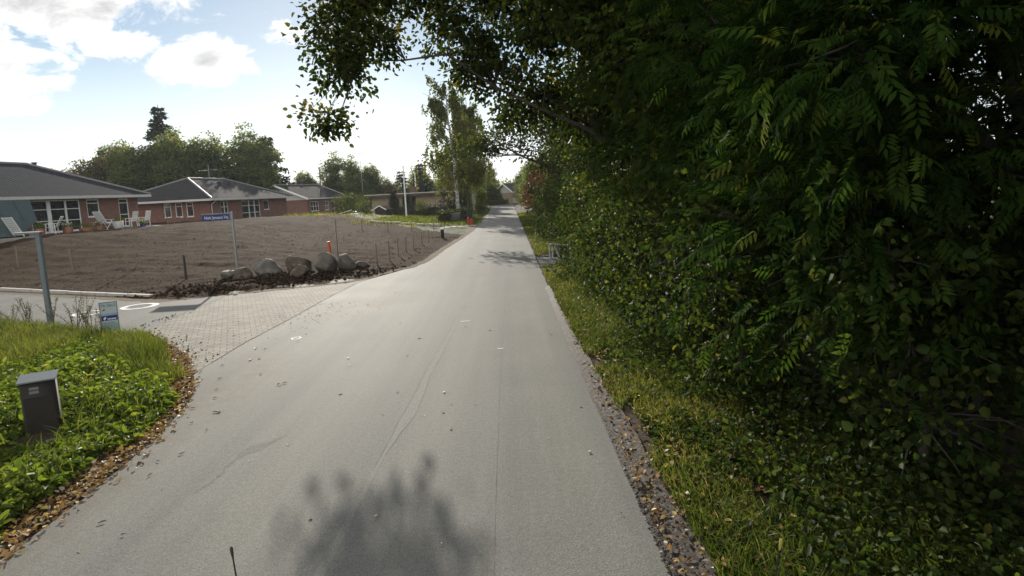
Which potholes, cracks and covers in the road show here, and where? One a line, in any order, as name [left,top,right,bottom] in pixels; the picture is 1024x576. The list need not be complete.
crack [376,259,483,464]
